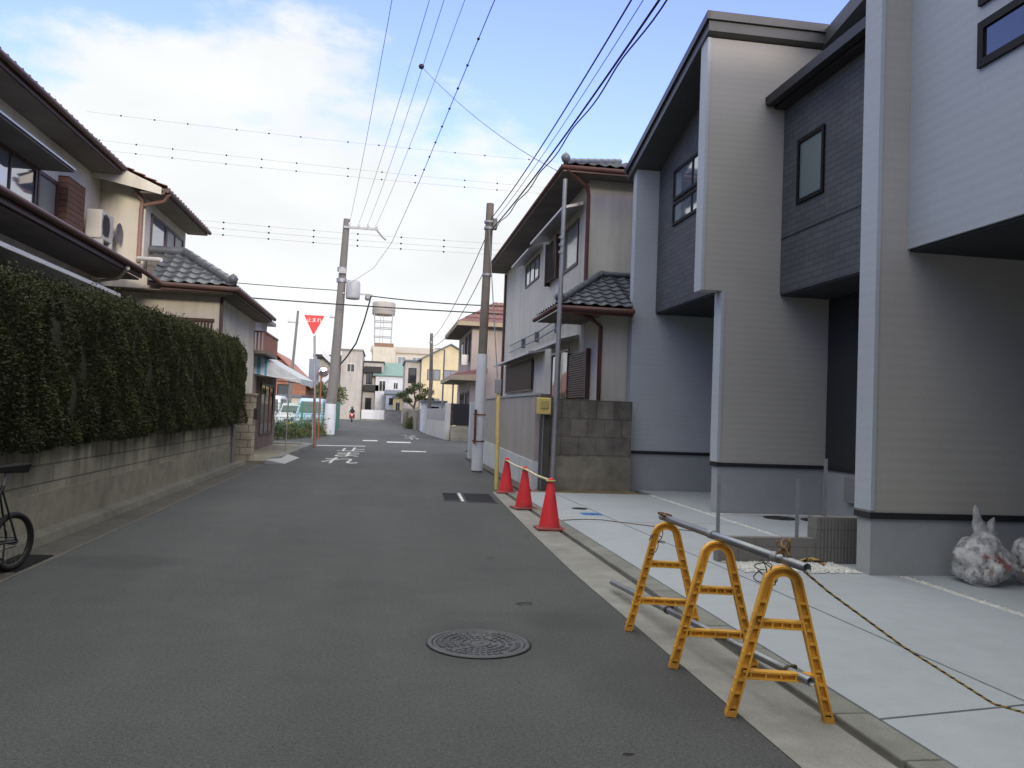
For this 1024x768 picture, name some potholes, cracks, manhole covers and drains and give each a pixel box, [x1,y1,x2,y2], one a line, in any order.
manhole cover [426,629,532,659]
